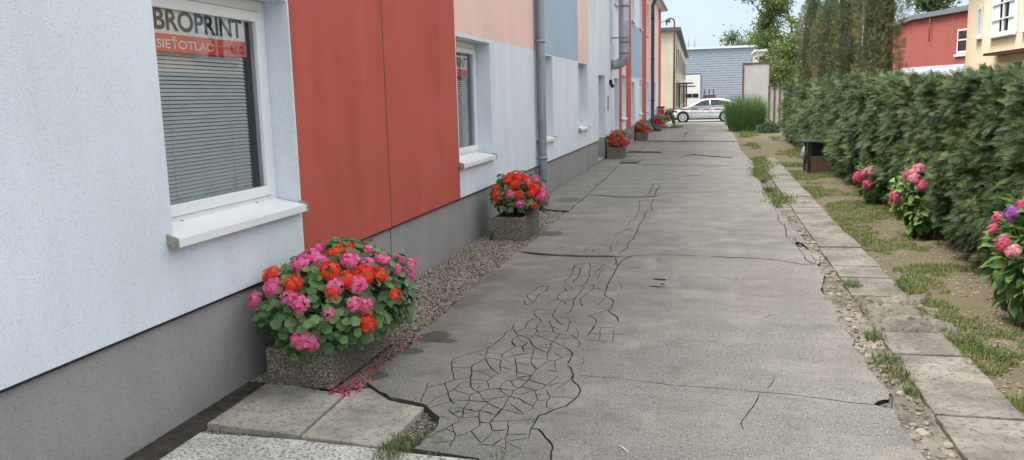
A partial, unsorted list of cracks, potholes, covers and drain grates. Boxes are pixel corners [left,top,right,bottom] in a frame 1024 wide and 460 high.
crack [421,184,873,460]
